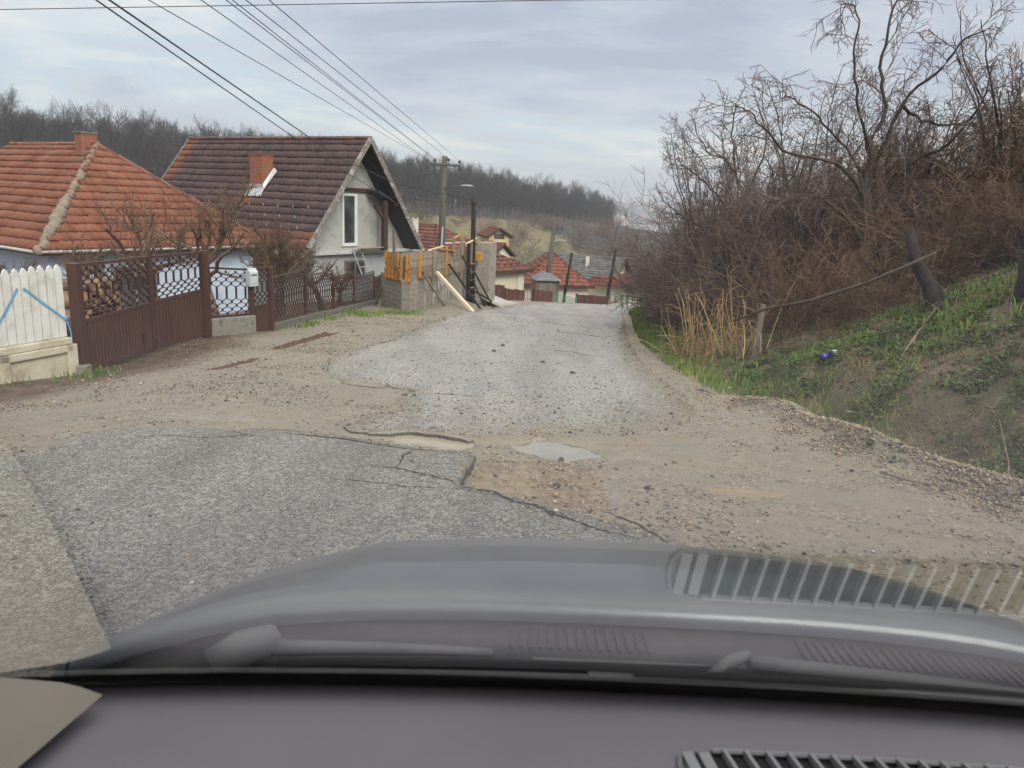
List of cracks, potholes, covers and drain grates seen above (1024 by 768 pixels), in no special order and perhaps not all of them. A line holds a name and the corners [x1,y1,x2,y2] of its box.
crack [286,432,669,543]
pothole [377,435,476,450]
